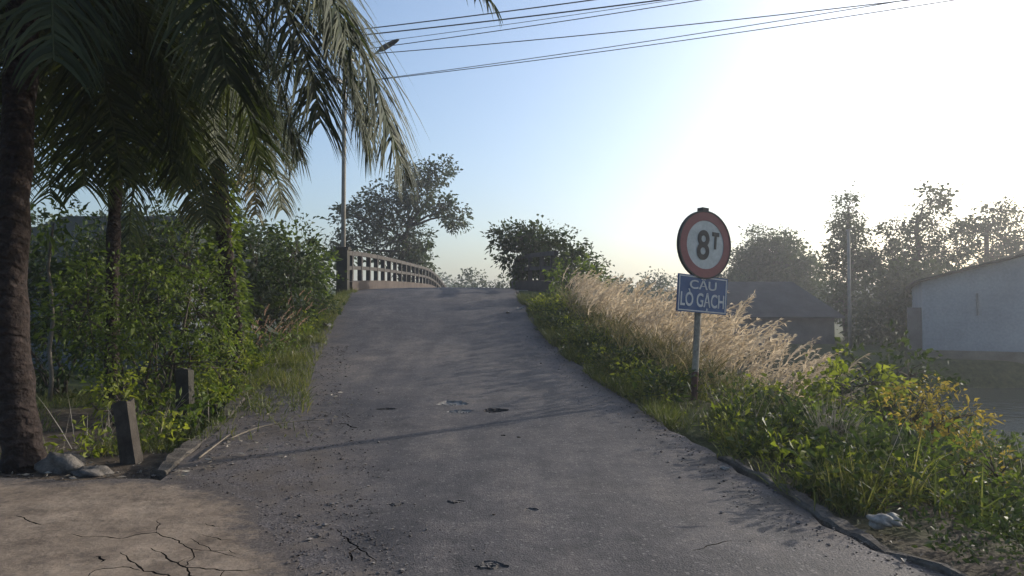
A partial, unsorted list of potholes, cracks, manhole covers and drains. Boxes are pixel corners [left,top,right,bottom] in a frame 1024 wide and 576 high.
crack [337,530,376,561]
crack [77,521,259,576]
pothole [474,560,509,570]
